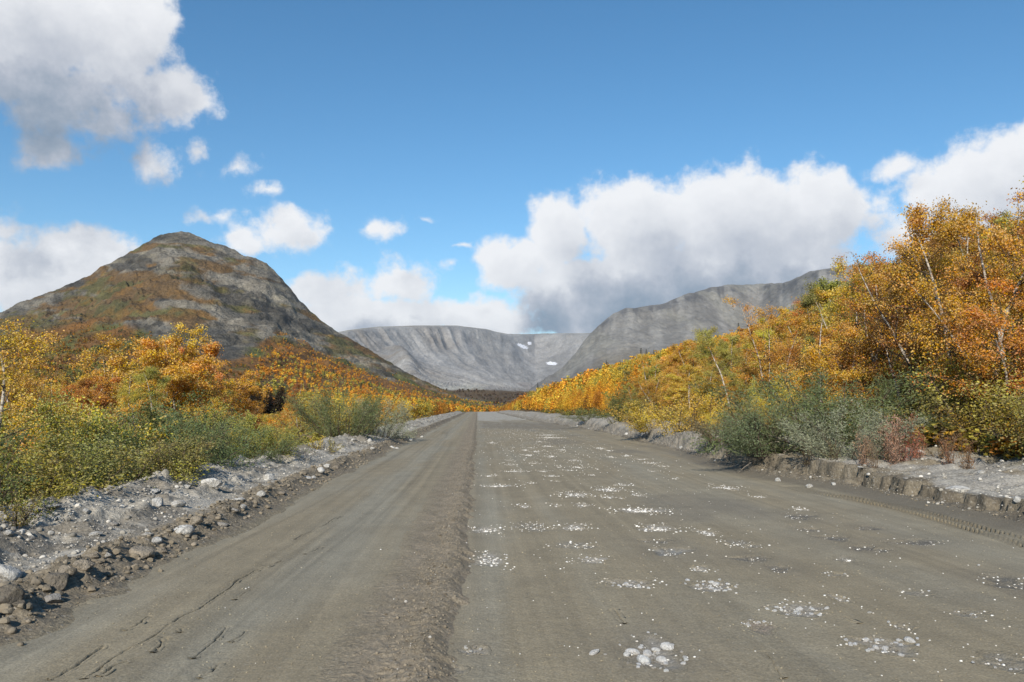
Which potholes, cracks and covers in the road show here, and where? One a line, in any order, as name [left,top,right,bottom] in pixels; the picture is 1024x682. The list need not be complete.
pothole [807,534,853,543]
pothole [874,538,948,546]
pothole [845,544,897,553]
pothole [720,555,775,564]
pothole [973,572,1024,590]
pothole [646,545,698,557]
